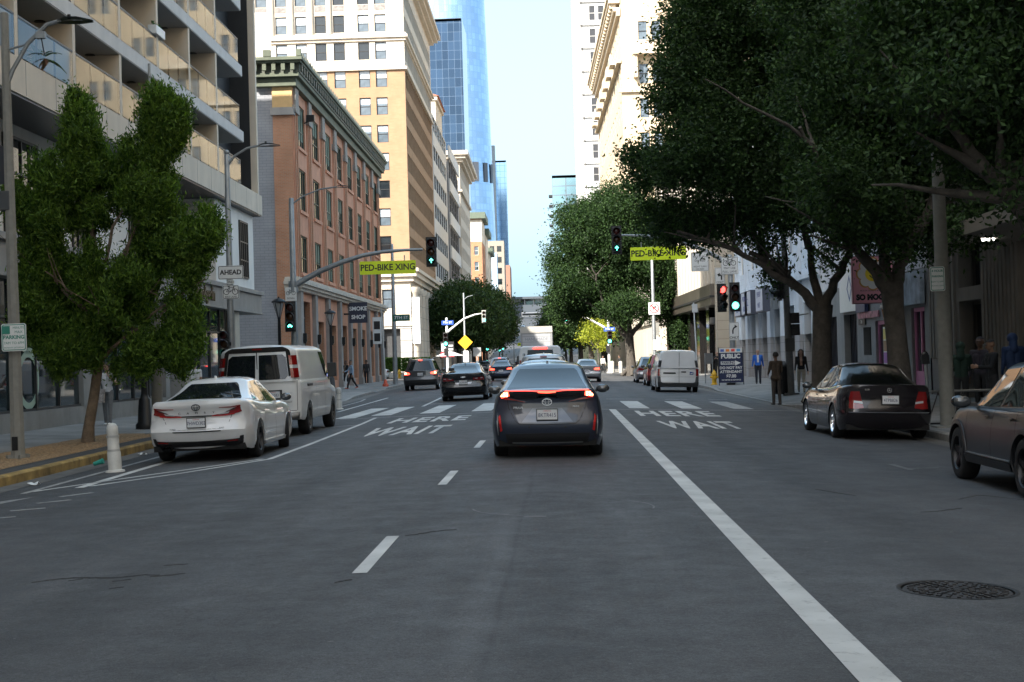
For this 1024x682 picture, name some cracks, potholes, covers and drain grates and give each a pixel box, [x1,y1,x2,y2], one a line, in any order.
crack [926,495,1023,512]
manhole cover [896,580,1021,600]
crack [31,564,186,589]
